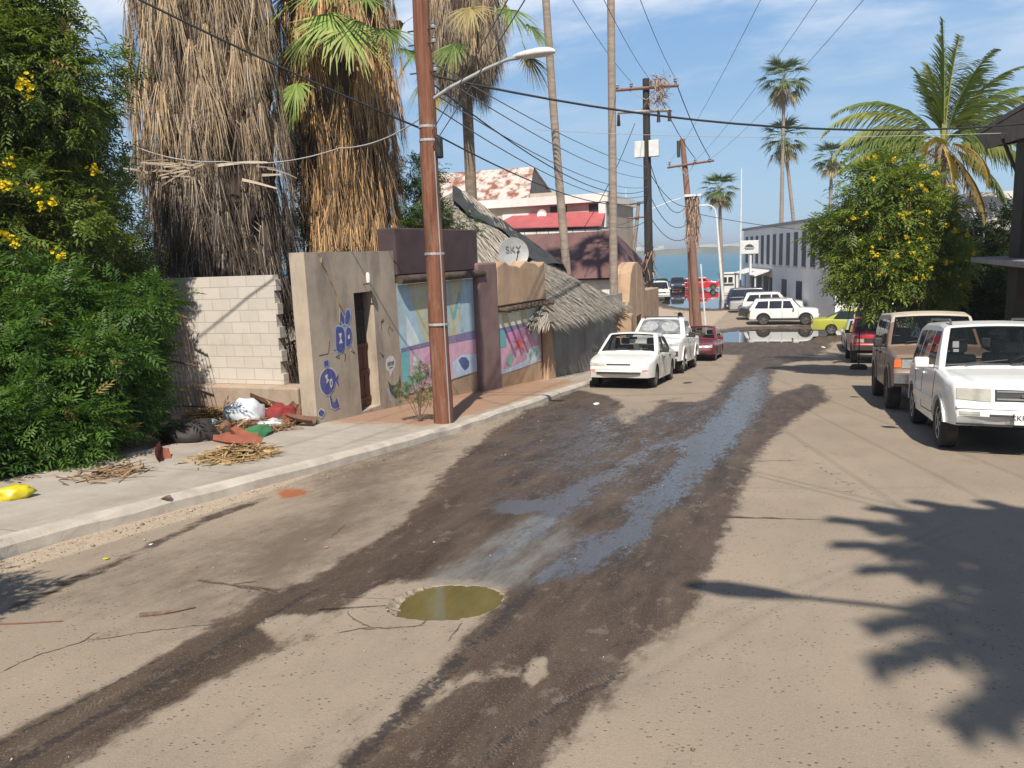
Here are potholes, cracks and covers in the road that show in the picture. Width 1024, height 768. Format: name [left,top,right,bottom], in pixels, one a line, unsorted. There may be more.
crack [339,612,426,633]
pothole [384,584,505,621]
crack [206,581,285,595]
crack [0,623,215,673]
